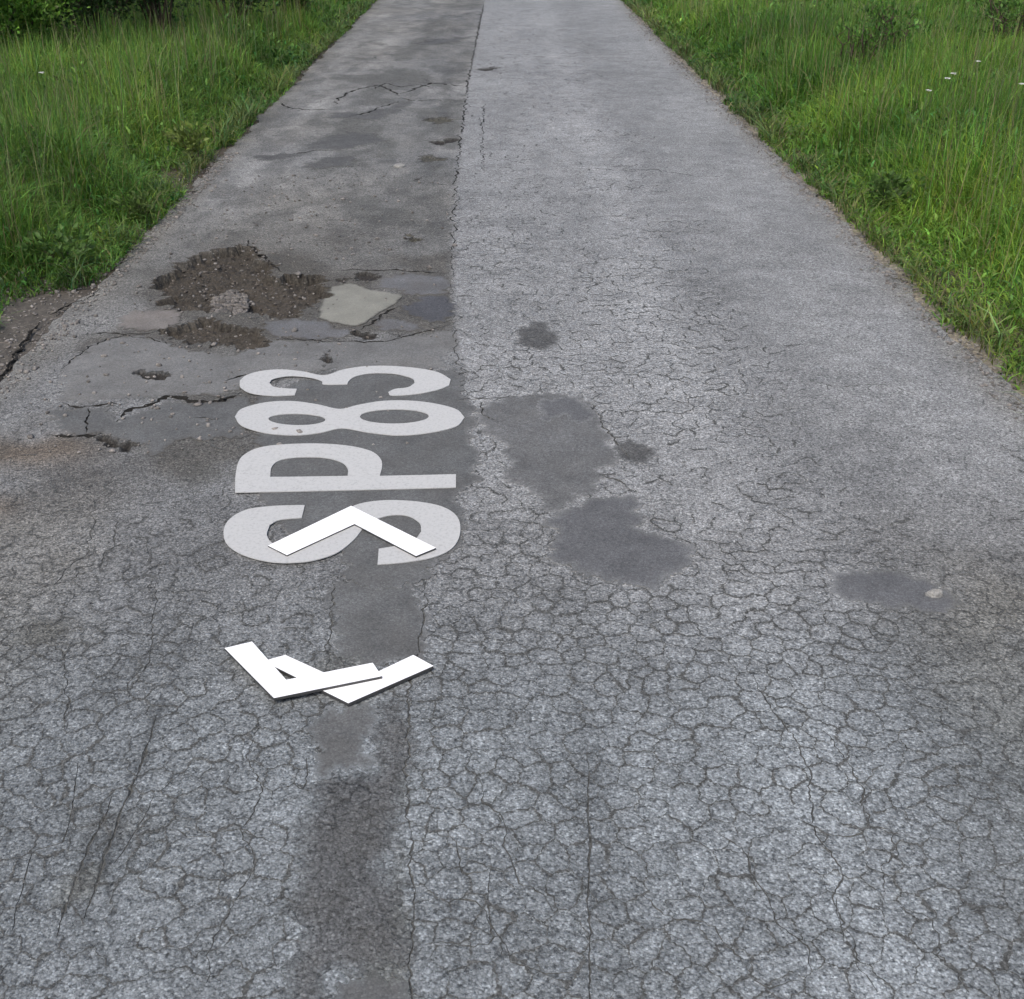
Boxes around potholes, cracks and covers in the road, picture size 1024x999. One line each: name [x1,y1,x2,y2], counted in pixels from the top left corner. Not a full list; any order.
crack [753,675,845,943]
crack [324,582,336,669]
crack [585,759,593,999]
pothole [131,370,171,381]
crack [900,906,969,992]
crack [127,584,158,697]
crack [480,781,553,911]
crack [421,897,495,948]
crack [640,893,798,990]
crack [160,825,292,843]
crack [697,553,815,594]
